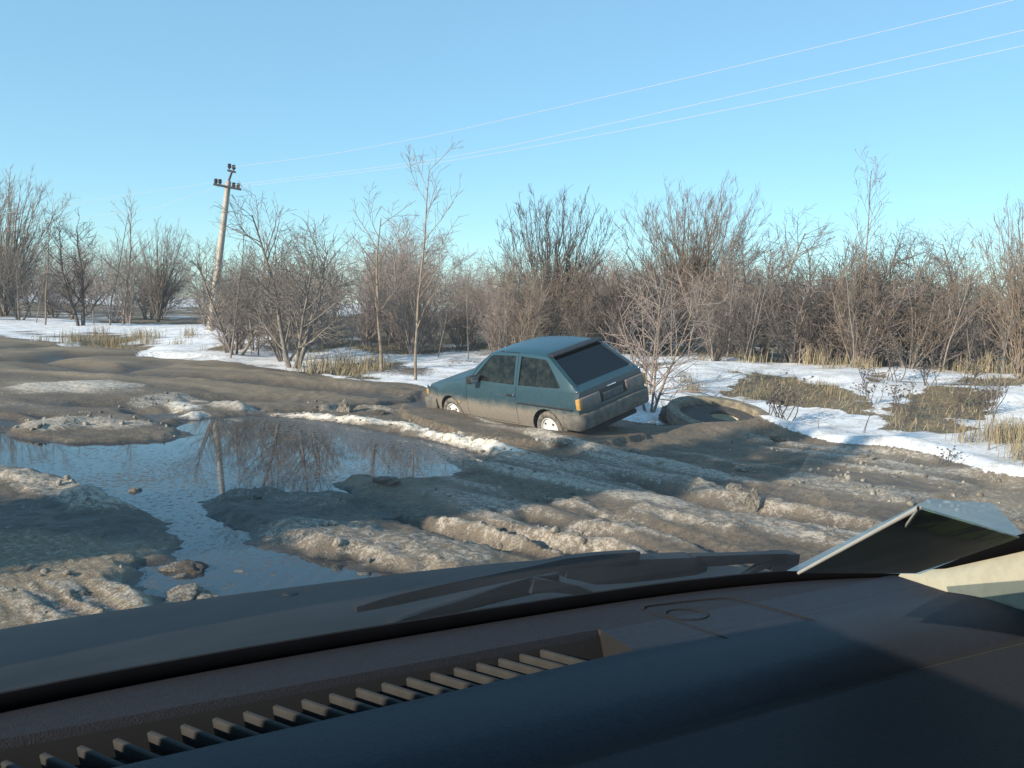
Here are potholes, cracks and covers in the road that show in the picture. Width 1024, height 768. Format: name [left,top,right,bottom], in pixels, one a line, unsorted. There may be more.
pothole [0,413,490,598]
